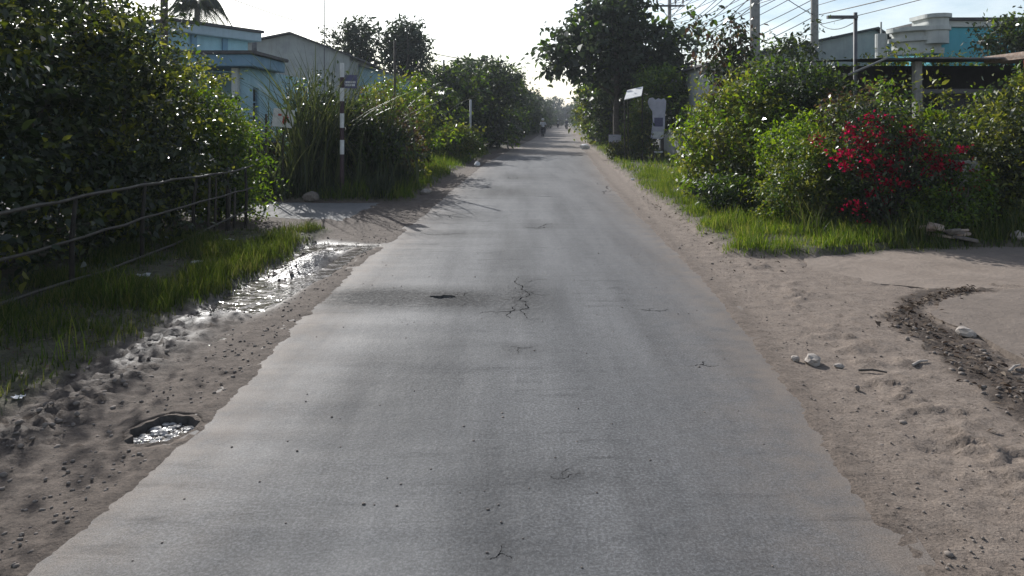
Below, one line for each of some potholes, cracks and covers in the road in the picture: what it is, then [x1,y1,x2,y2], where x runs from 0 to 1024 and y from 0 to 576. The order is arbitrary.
pothole [122,413,204,447]
crack [482,277,546,319]
